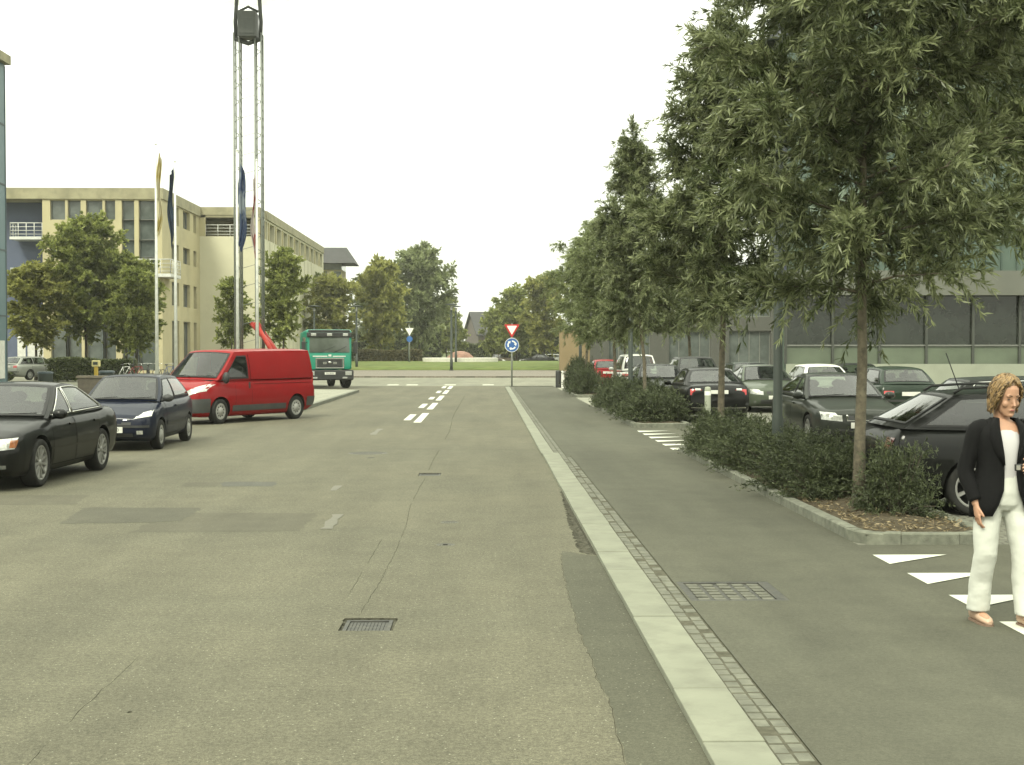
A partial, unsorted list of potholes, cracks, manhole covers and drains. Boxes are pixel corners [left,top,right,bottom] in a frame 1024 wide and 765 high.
drain grate [338,618,398,631]
crack [350,399,463,613]
